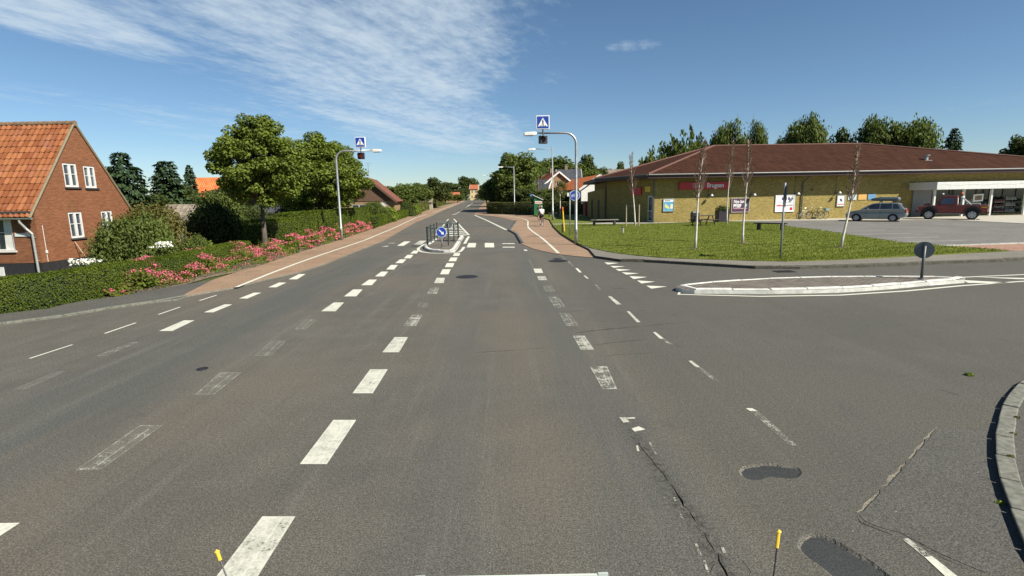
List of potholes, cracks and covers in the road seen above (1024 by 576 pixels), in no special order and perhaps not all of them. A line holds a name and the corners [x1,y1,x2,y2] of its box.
crack [635,436,751,576]
pothole [797,533,890,576]
crack [856,426,985,570]
pothole [739,463,802,480]
crack [577,310,674,356]
